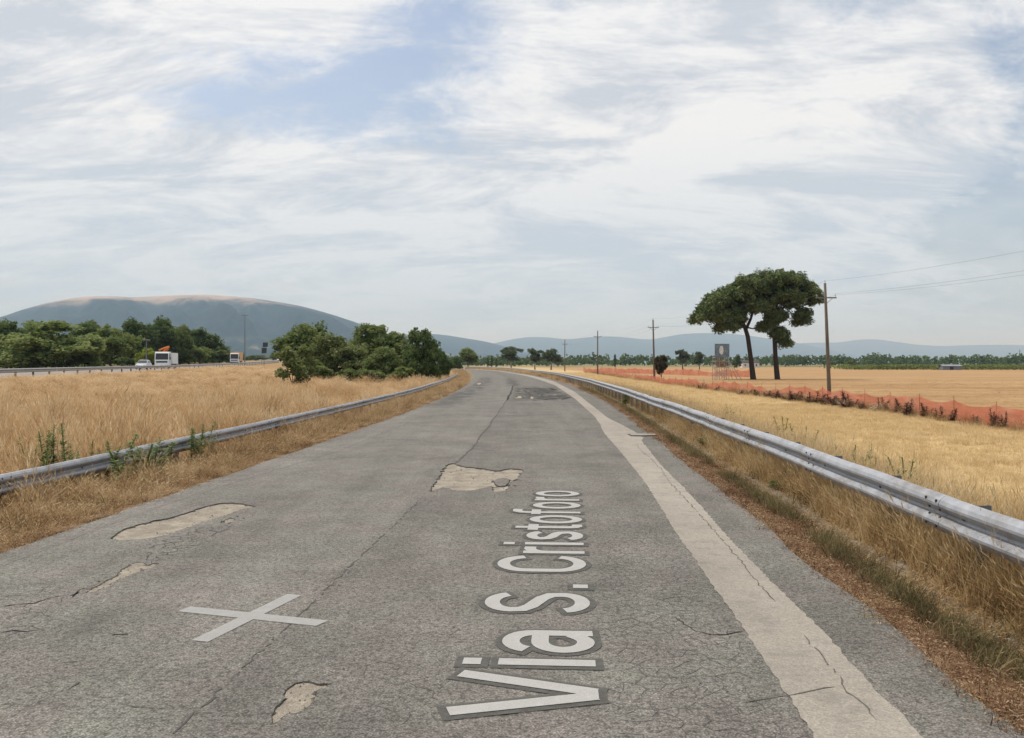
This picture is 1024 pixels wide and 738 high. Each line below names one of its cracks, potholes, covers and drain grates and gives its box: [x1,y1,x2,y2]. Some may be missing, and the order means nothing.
pothole [110,502,256,540]
pothole [430,462,524,492]
crack [1,586,174,709]
pothole [81,561,159,593]
crack [144,522,231,561]
pothole [271,668,345,723]
